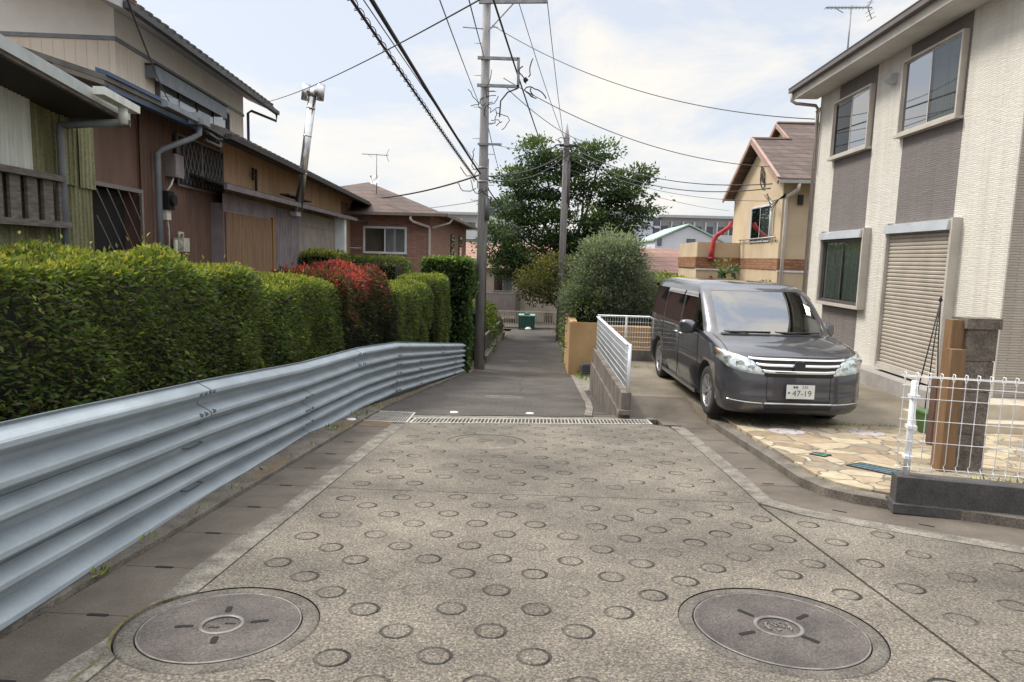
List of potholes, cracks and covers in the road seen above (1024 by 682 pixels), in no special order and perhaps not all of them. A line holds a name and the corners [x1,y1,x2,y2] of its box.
manhole cover [448,435,525,449]
manhole cover [678,589,890,680]
manhole cover [113,588,319,675]
drain grate [364,411,416,424]
